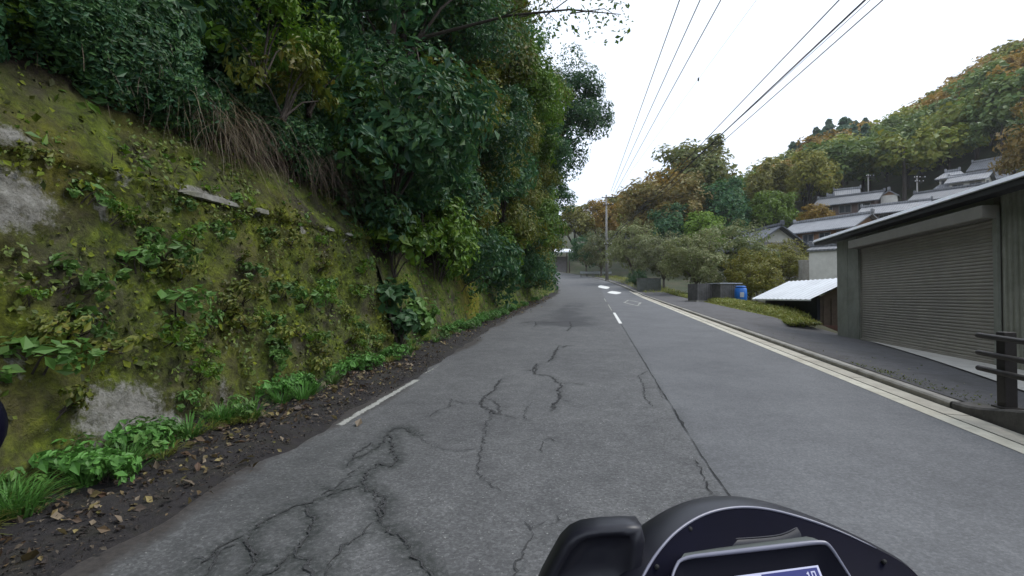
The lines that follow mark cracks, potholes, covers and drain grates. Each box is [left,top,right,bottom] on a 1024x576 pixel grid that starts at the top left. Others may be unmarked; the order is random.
crack [189,427,435,576]
crack [523,321,577,411]
crack [622,326,731,496]
crack [422,379,511,491]
crack [513,513,561,576]
